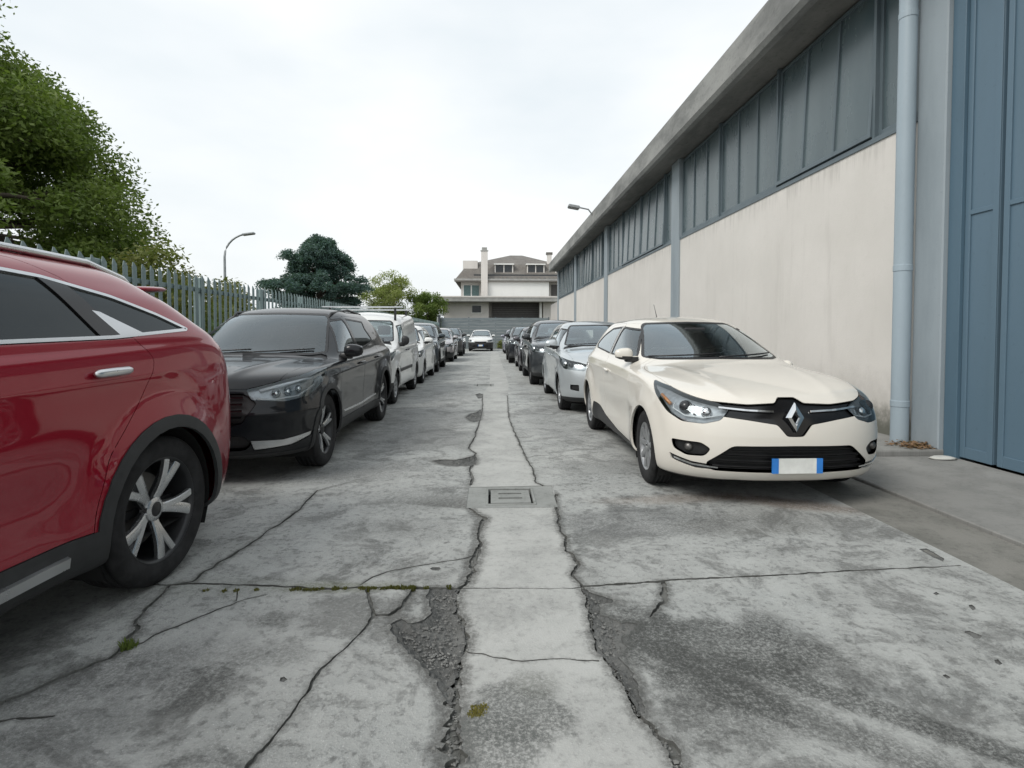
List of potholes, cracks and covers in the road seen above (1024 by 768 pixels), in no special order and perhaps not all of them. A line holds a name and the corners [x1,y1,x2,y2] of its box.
pothole [390,589,466,705]
manhole cover [466,486,558,509]
pothole [583,589,645,716]
crack [0,396,682,768]
